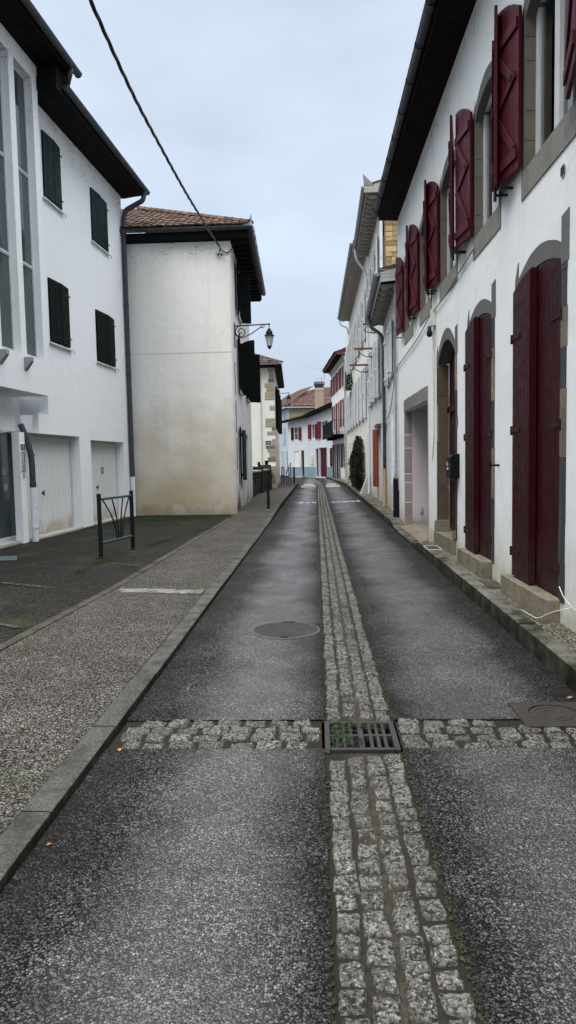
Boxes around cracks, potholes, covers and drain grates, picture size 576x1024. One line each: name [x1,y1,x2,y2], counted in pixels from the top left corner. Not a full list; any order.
manhole cover [508,702,576,730]
drain grate [324,719,401,754]
manhole cover [251,621,320,639]
